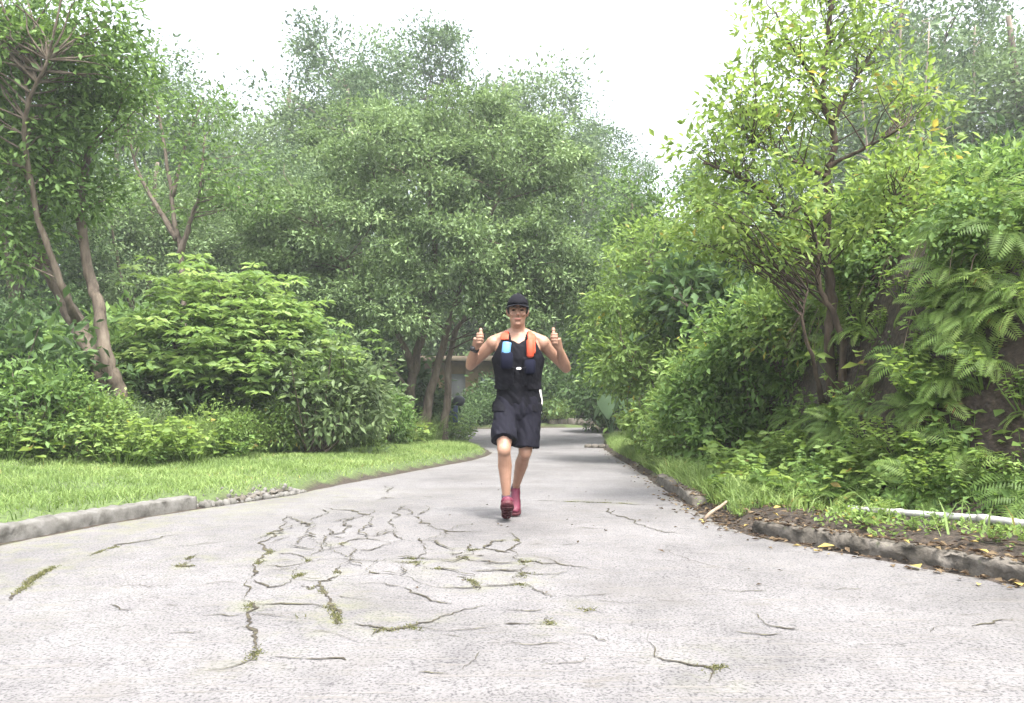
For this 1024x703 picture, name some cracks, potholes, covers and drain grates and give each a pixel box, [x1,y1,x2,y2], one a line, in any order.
crack [737,612,795,635]
crack [74,486,634,671]
crack [584,509,727,569]
crack [647,640,730,686]
crack [6,564,62,600]
